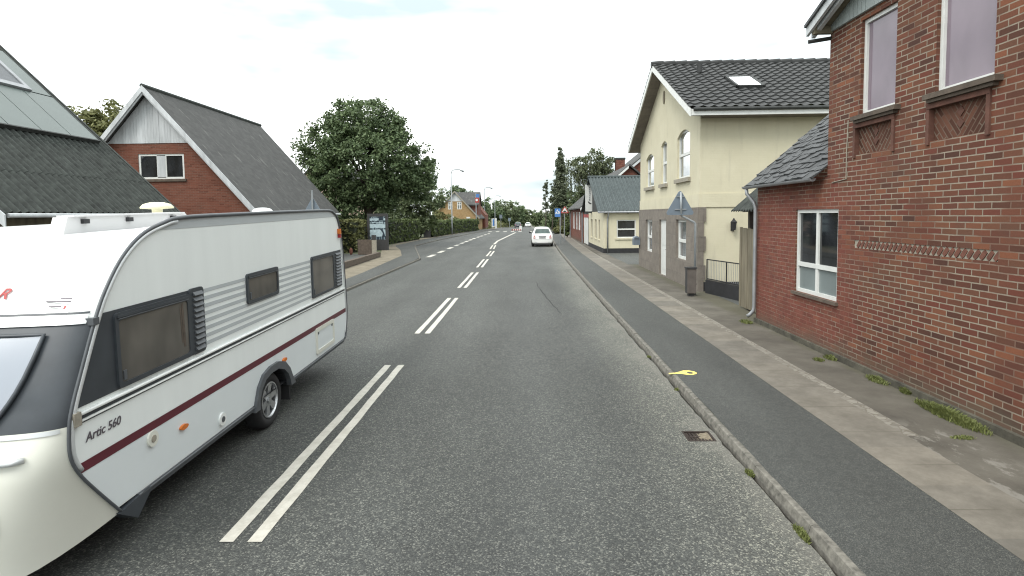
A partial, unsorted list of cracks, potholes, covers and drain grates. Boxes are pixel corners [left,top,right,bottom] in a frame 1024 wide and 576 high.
drain grate [681,431,716,441]
